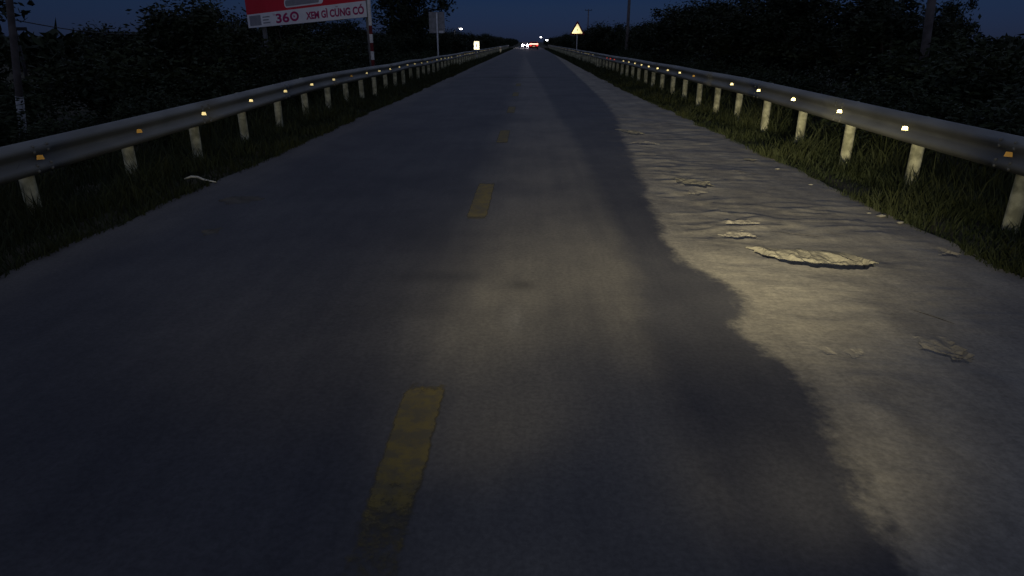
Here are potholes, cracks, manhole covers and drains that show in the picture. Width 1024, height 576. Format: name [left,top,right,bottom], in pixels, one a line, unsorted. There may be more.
pothole [670,177,714,189]
pothole [745,245,879,270]
pothole [843,347,865,359]
pothole [718,229,757,240]
pothole [816,344,838,356]
pothole [931,246,962,258]
pothole [911,335,977,364]
